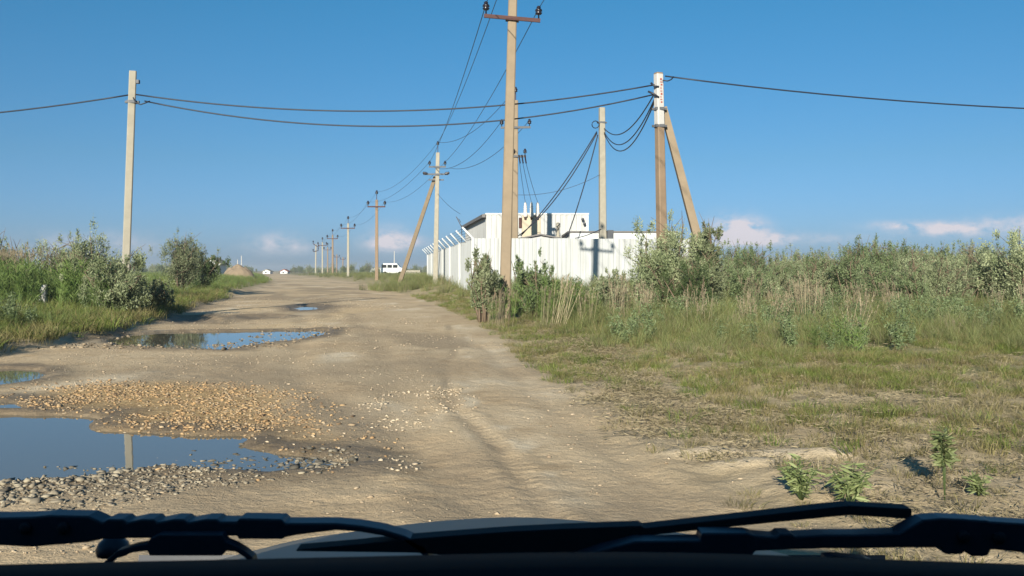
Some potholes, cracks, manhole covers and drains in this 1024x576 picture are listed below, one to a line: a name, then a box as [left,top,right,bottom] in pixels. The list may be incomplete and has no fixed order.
pothole [0,412,341,481]
pothole [104,329,331,350]
pothole [0,367,49,385]
